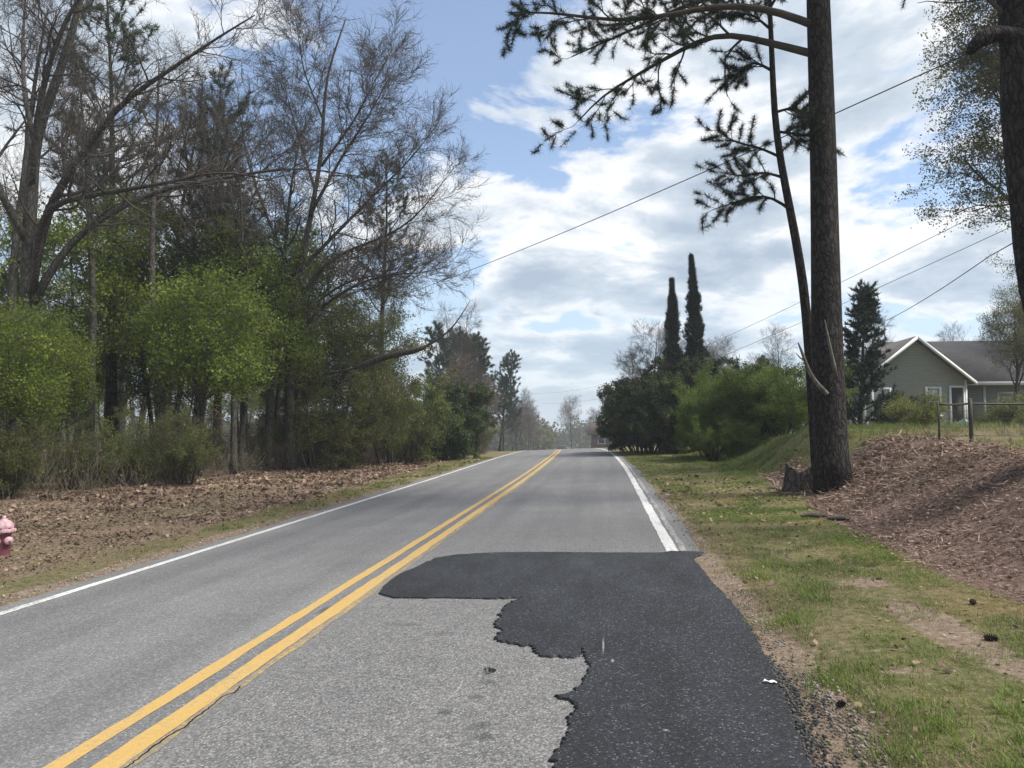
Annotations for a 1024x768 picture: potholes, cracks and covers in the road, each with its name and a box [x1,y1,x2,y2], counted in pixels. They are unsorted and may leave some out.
crack [124,685,241,768]
